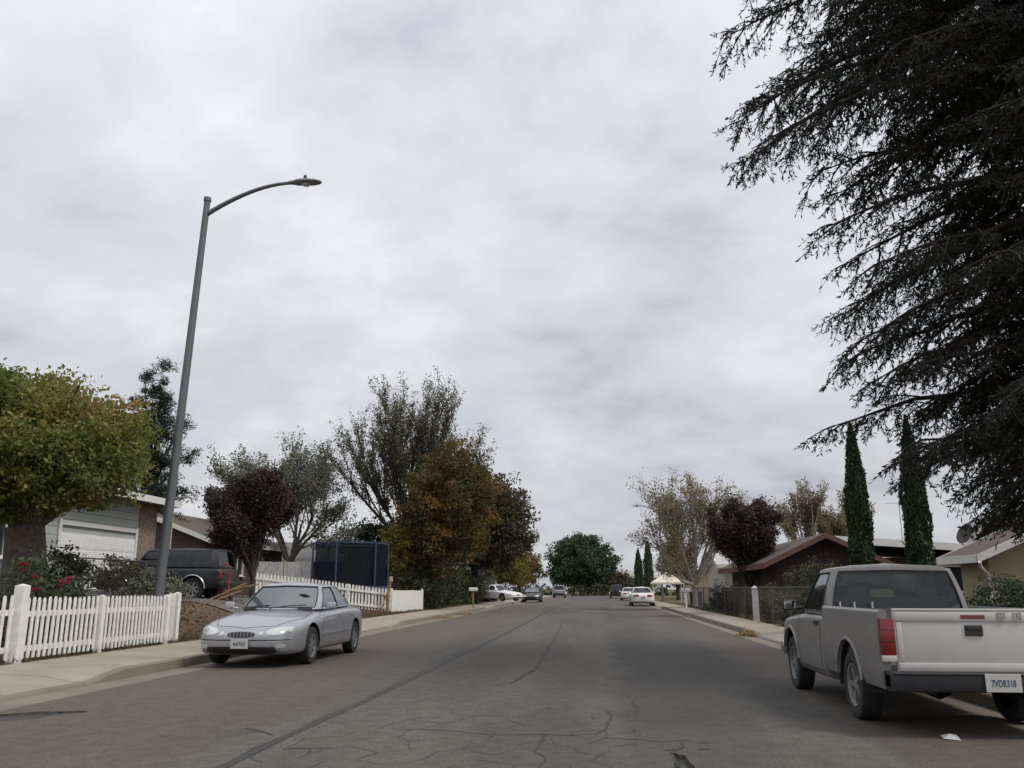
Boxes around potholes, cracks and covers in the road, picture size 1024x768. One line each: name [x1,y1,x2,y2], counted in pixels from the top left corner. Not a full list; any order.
crack [236,622,711,768]
pothole [673,753,695,768]
